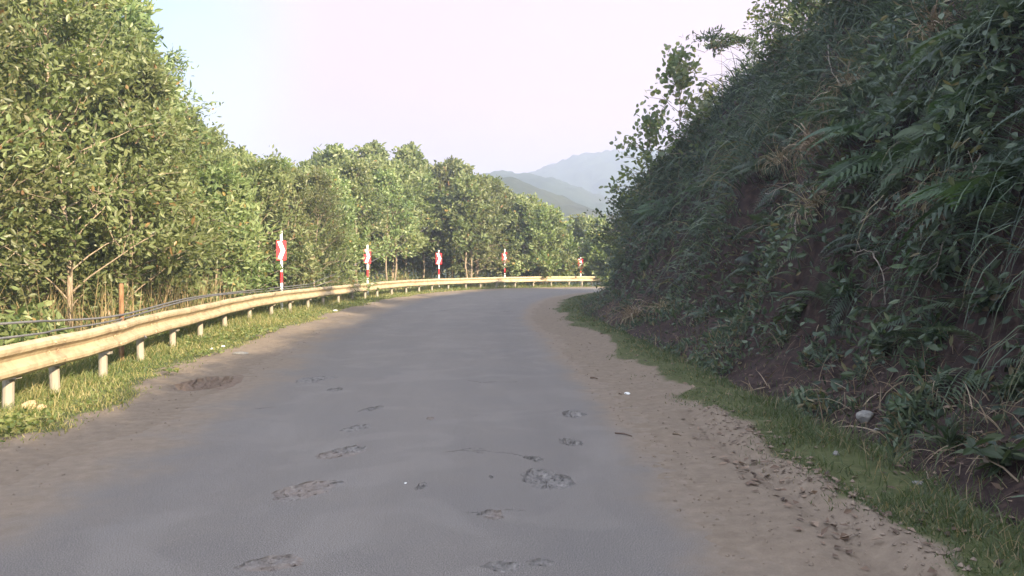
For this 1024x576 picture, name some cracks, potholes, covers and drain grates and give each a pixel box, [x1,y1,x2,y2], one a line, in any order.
pothole [315,445,367,459]
pothole [558,438,583,446]
pothole [480,561,520,573]
pothole [172,374,244,391]
pothole [521,468,576,490]
pothole [526,557,556,567]
pothole [562,410,587,418]
pothole [233,553,304,572]
pothole [271,480,344,502]
pothole [476,509,504,520]
pothole [340,424,372,432]
